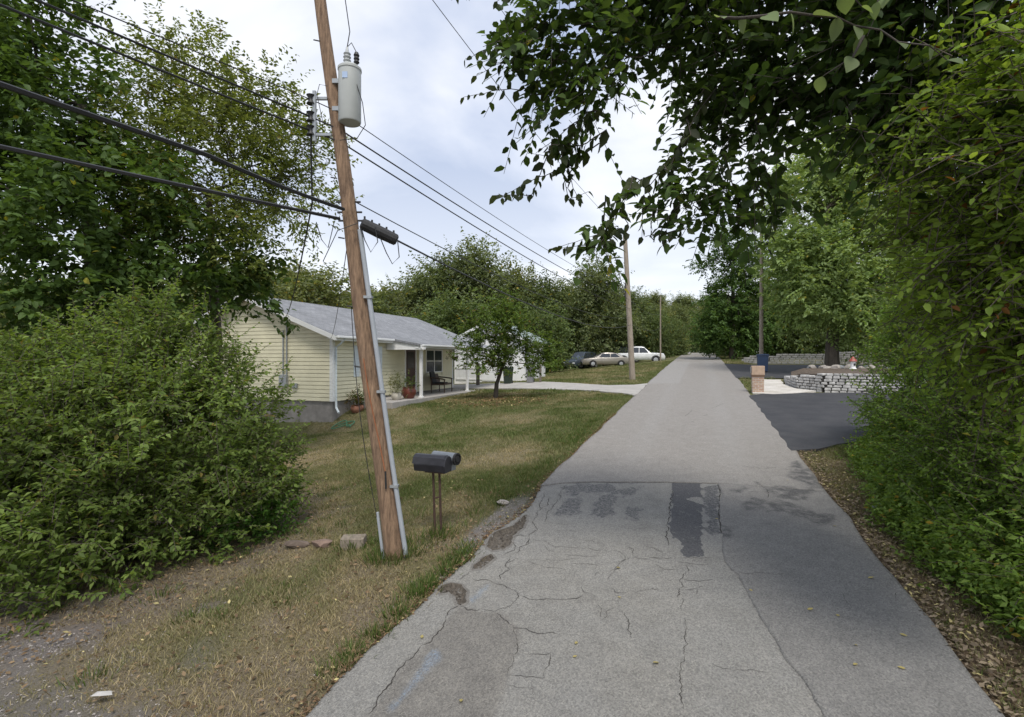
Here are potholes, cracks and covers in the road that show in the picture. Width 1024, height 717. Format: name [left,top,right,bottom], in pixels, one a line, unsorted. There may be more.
pothole [434,582,470,608]
pothole [470,554,497,571]
pothole [484,514,529,552]
crack [370,482,722,713]
